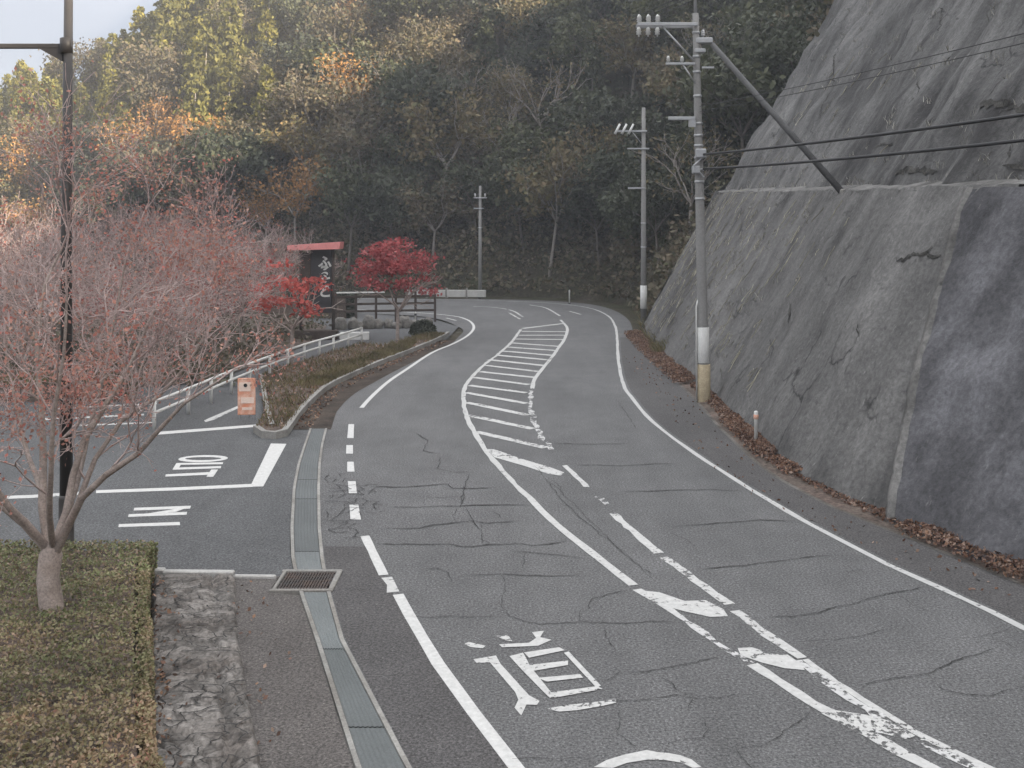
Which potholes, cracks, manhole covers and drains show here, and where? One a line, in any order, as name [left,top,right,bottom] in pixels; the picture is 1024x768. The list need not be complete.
crack [325,434,672,647]
crack [770,587,926,617]
drain grate [269,569,343,595]
crack [703,555,829,569]
crack [864,629,1024,696]
